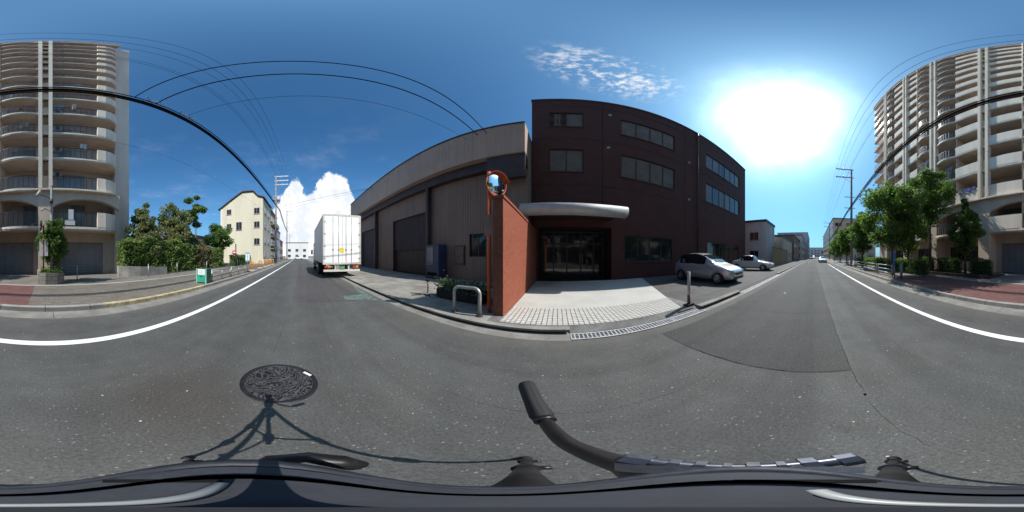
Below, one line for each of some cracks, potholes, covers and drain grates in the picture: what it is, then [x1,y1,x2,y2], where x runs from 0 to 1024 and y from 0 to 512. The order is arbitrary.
drain grate [669,308,706,322]
drain grate [625,318,676,334]
drain grate [570,328,630,340]
manhole cover [239,364,318,404]
